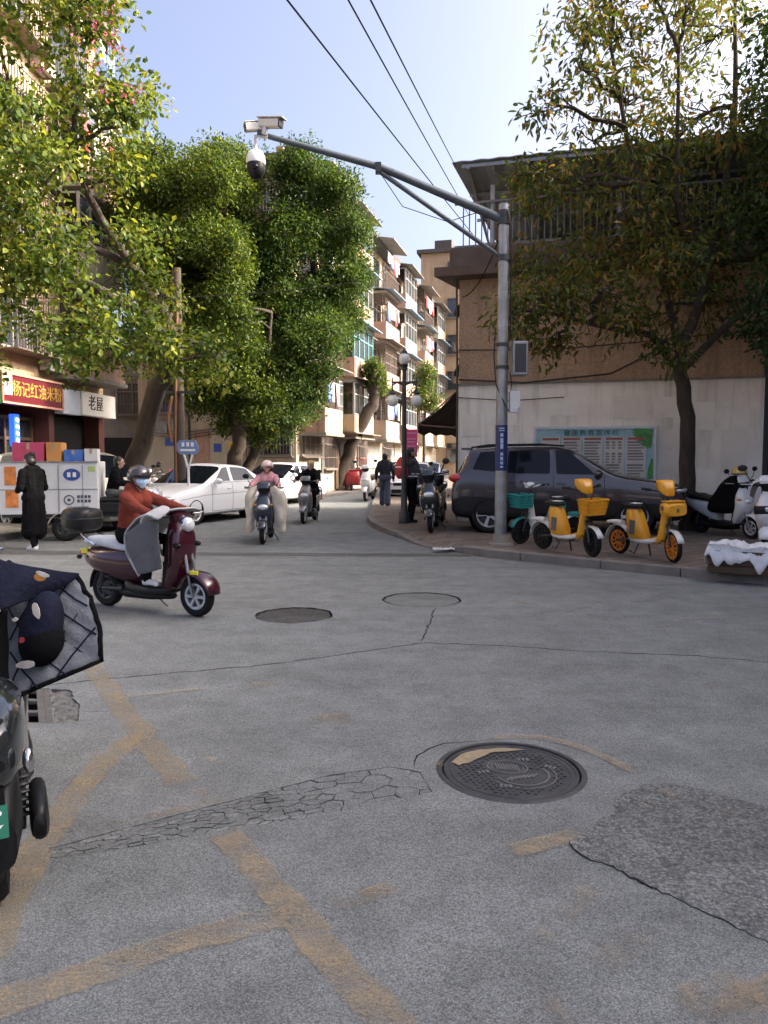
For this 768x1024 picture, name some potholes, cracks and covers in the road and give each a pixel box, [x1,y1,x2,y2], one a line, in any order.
manhole cover [255,607,333,624]
drain grate [25,689,53,724]
crack [43,740,484,861]
crack [52,610,760,685]
pothole [50,689,80,723]
manhole cover [381,592,462,607]
manhole cover [436,742,588,804]
